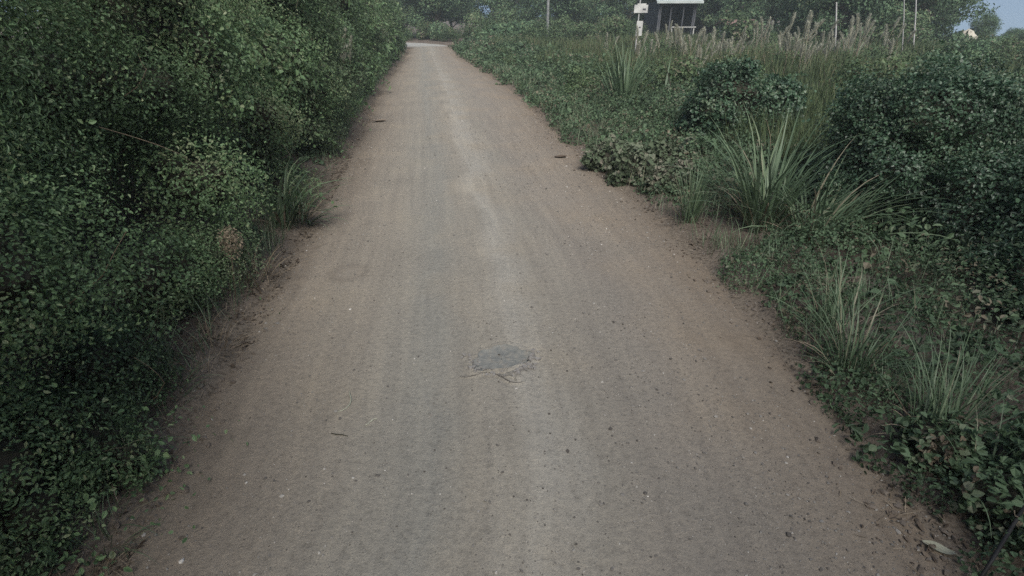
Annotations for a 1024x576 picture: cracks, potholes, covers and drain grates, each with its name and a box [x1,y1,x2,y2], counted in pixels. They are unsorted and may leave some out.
pothole [460,341,546,377]
